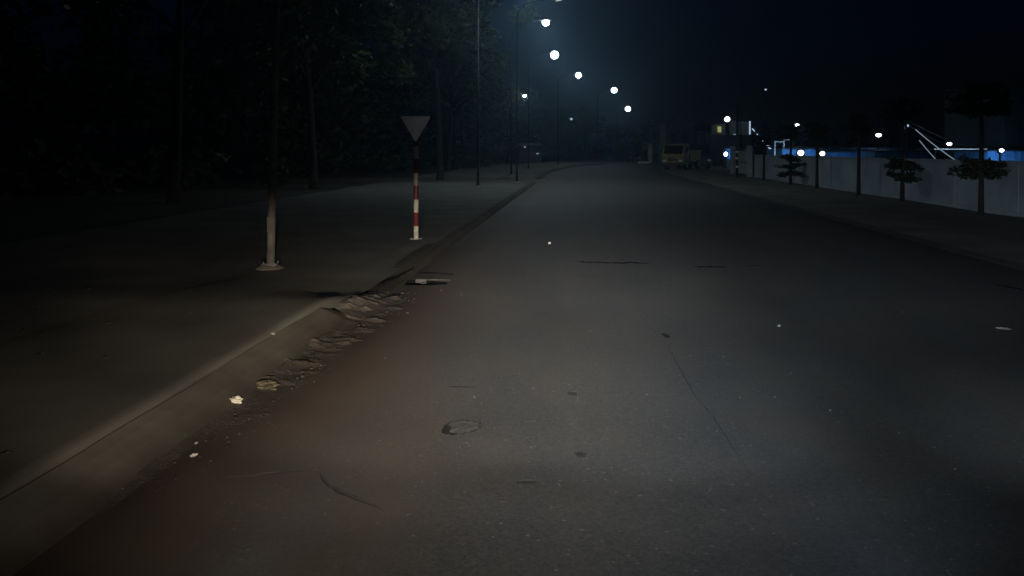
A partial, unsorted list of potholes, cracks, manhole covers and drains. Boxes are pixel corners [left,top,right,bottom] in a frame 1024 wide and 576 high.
pothole [442,419,481,435]
crack [229,469,385,512]
crack [575,261,650,277]
